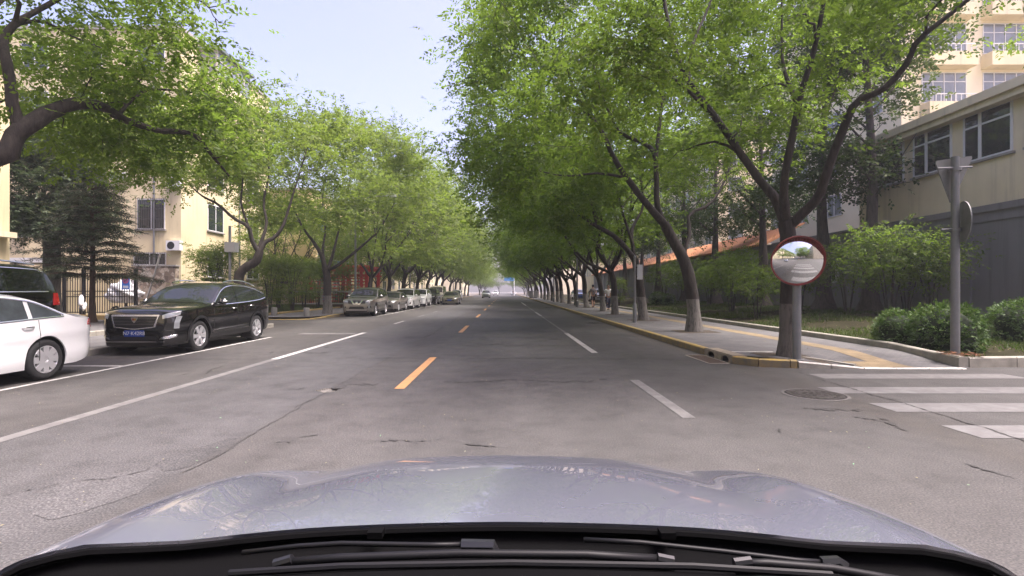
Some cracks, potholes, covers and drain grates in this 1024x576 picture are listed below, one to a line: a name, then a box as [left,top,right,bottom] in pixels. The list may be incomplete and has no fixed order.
crack [389,438,499,447]
drain grate [686,355,730,364]
crack [181,358,387,473]
crack [795,406,913,433]
crack [3,467,150,495]
manhole cover [781,389,851,401]
